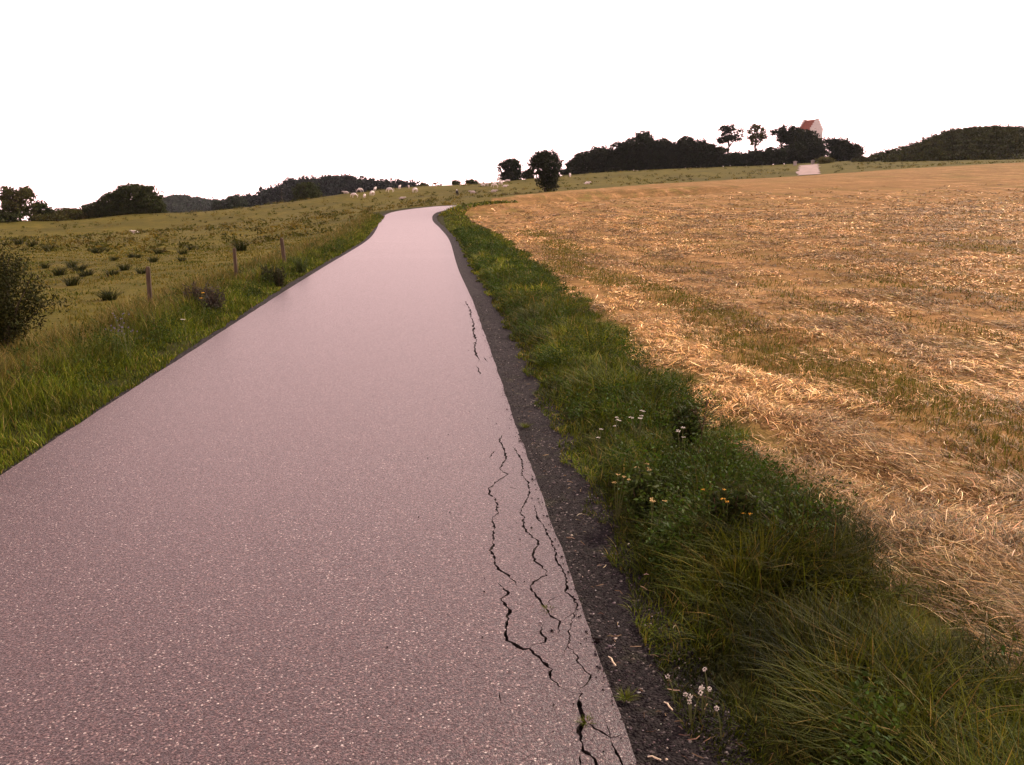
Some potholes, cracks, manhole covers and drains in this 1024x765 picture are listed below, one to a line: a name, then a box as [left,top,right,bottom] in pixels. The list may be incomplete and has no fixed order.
crack [488,436,623,765]
crack [465,301,488,374]
